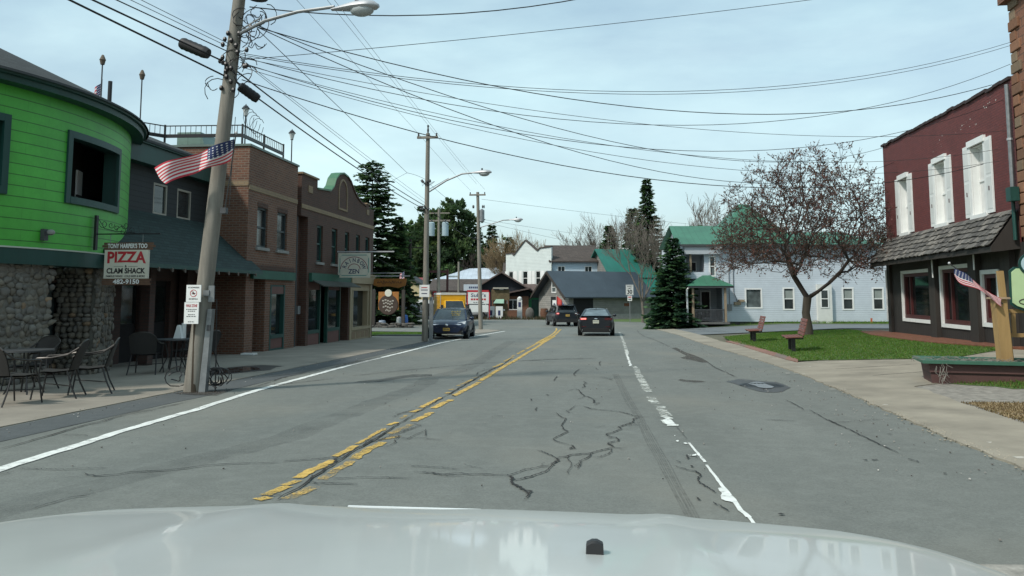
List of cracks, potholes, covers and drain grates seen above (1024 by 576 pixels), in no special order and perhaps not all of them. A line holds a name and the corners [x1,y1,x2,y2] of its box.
crack [675,454,728,510]
crack [787,400,919,462]
crack [36,359,638,499]
